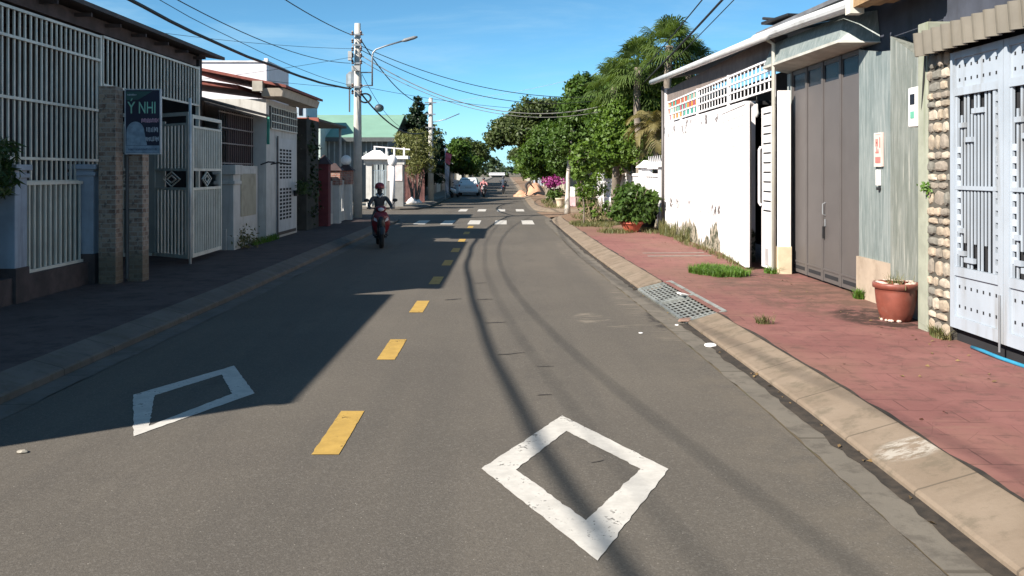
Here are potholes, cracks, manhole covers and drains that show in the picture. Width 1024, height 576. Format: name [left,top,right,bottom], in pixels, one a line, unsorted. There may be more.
drain grate [638,280,727,323]
